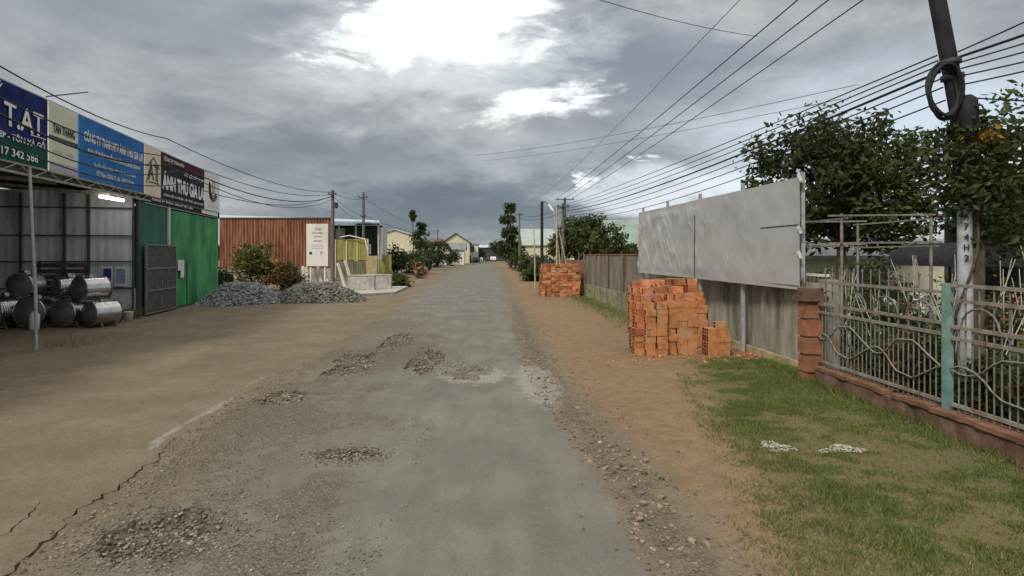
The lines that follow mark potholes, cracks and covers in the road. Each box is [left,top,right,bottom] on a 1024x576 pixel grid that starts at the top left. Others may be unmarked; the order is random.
pothole [440,361,497,381]
pothole [313,449,381,463]
pothole [403,349,447,375]
pothole [376,333,416,349]
crack [1,438,175,576]
pothole [95,506,236,565]
pothole [319,352,380,377]
pothole [254,390,308,406]
